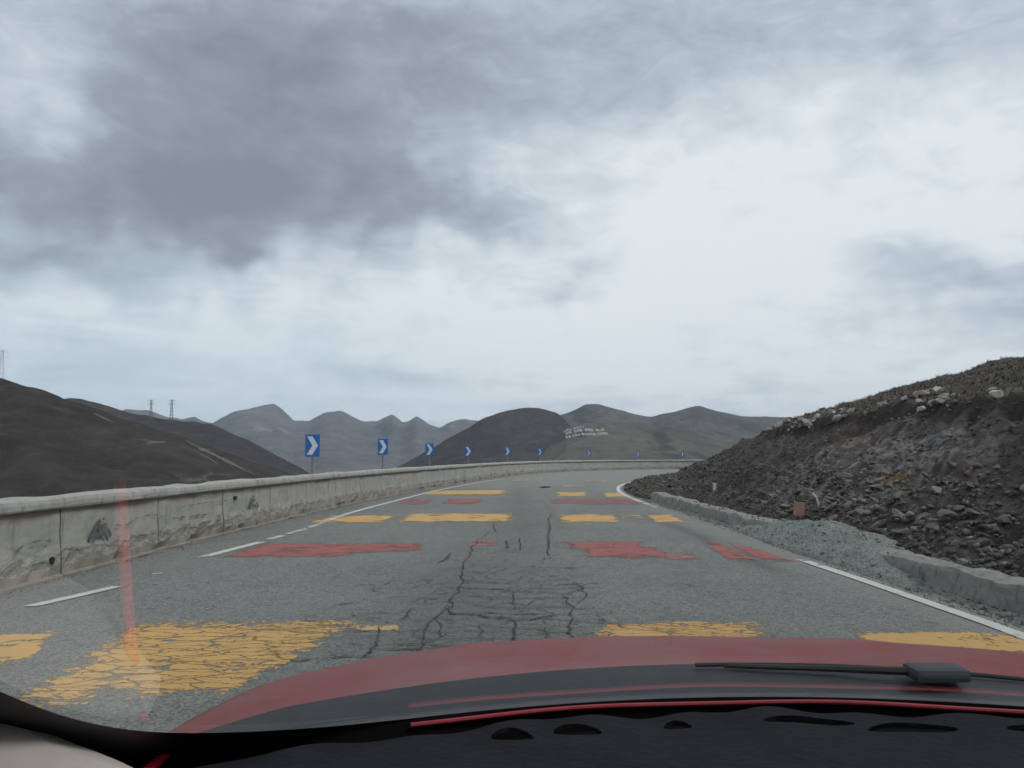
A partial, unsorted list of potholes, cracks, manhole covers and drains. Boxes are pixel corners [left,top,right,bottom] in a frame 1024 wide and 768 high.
crack [269,520,628,661]
